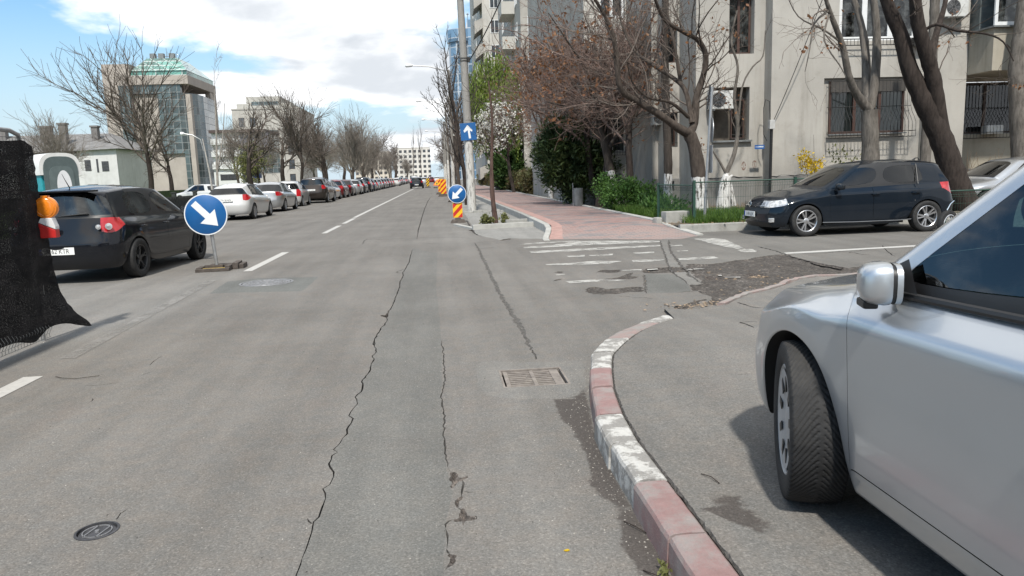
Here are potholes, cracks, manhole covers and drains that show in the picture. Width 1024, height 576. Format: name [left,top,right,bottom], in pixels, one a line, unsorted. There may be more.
drain grate [498,367,571,388]
crack [295,200,435,576]
crack [440,341,471,554]
manhole cover [239,279,294,287]
manhole cover [74,521,120,541]
